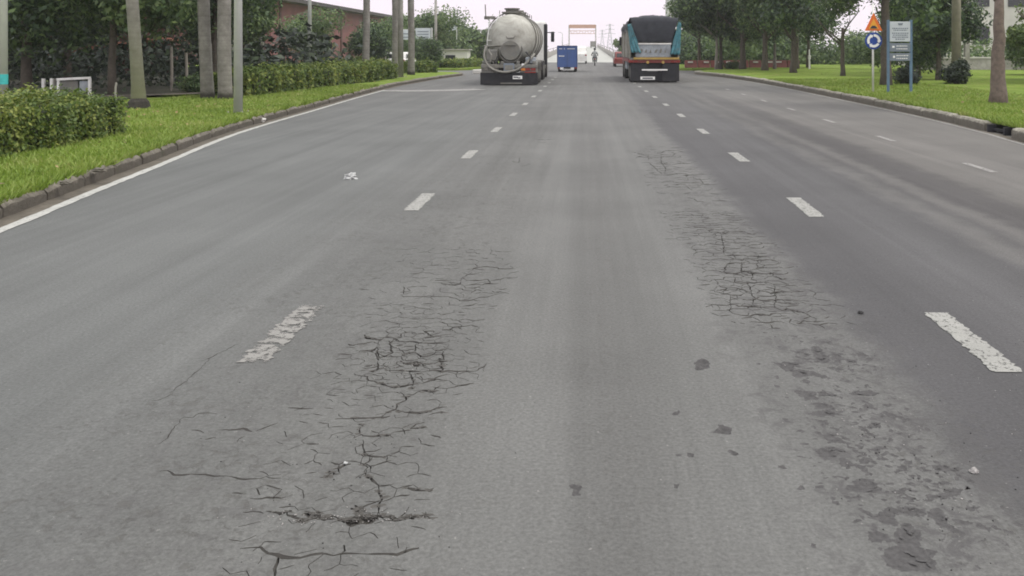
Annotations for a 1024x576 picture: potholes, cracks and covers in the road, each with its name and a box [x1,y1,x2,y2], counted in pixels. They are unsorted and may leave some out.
crack [154,247,519,576]
pothole [344,514,377,527]
crack [633,150,714,202]
crack [661,200,853,333]
